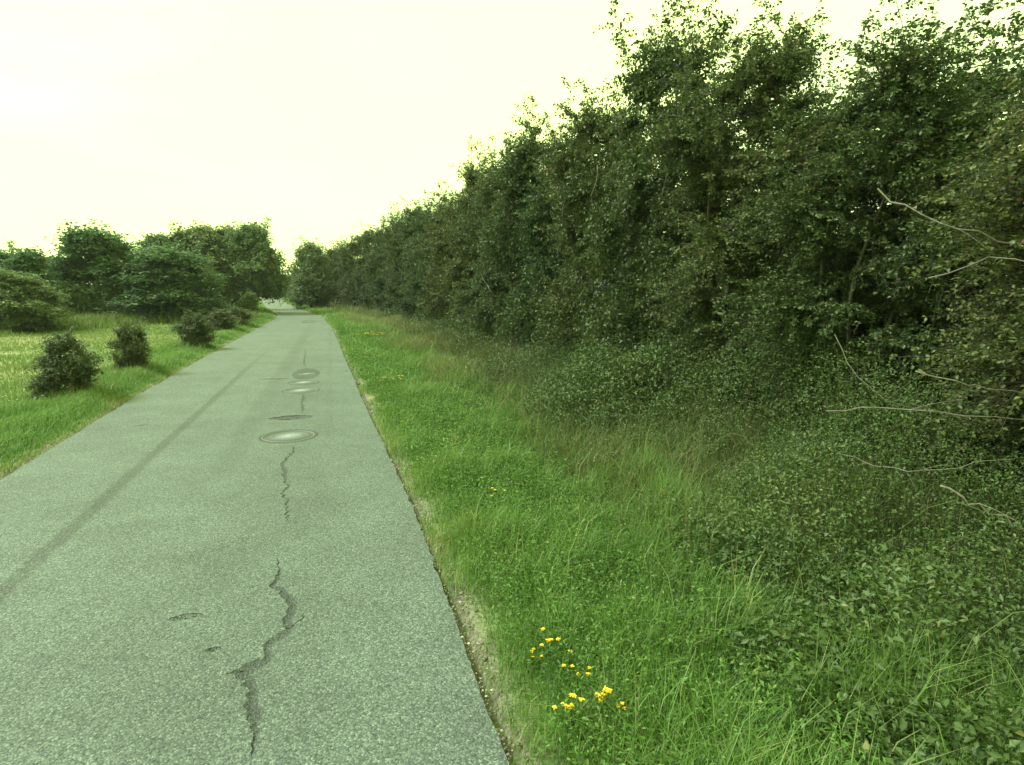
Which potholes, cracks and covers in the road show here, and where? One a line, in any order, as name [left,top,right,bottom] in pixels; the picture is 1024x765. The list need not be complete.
manhole cover [258,429,318,444]
manhole cover [292,368,320,379]
crack [280,446,295,520]
crack [264,350,306,413]
crack [227,559,304,756]
